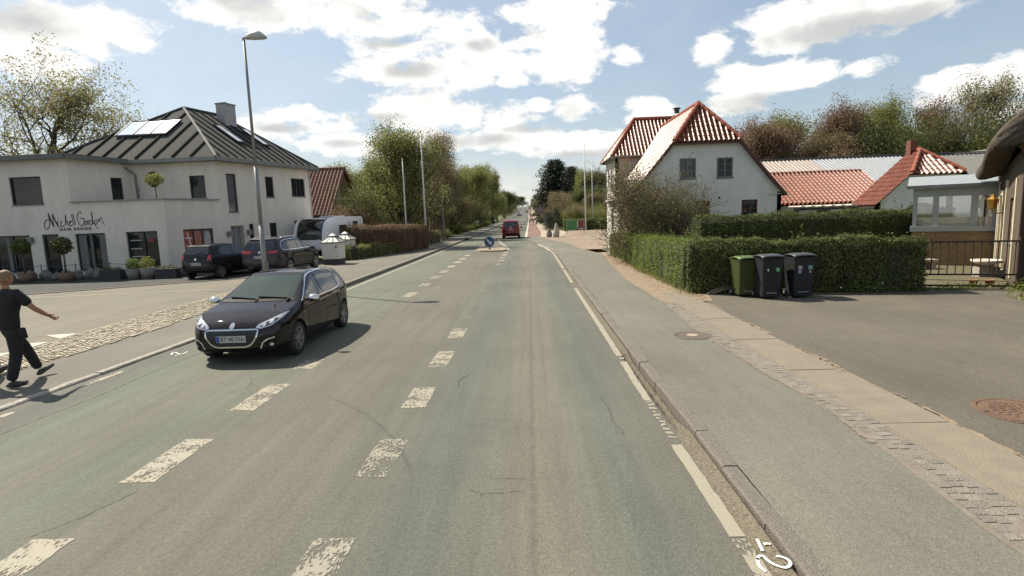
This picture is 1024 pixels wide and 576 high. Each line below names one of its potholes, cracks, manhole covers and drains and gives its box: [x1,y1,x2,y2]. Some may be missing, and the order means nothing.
manhole cover [970,398,1024,424]
manhole cover [673,331,712,340]
